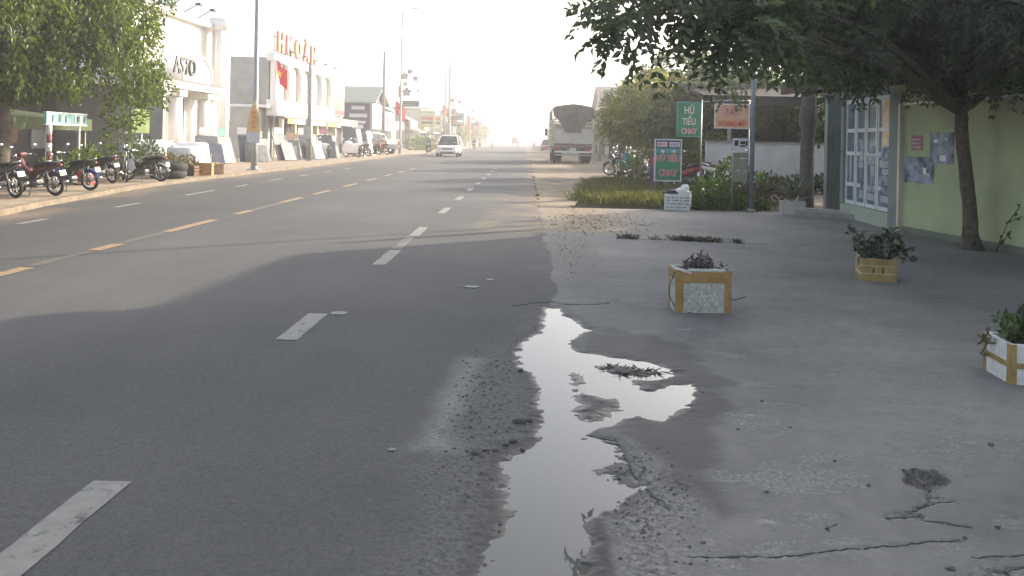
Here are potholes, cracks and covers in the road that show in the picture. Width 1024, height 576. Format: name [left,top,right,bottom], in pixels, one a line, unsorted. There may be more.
pothole [900,467,953,492]
pothole [470,305,705,576]
crack [687,489,1024,576]
crack [588,436,670,511]
